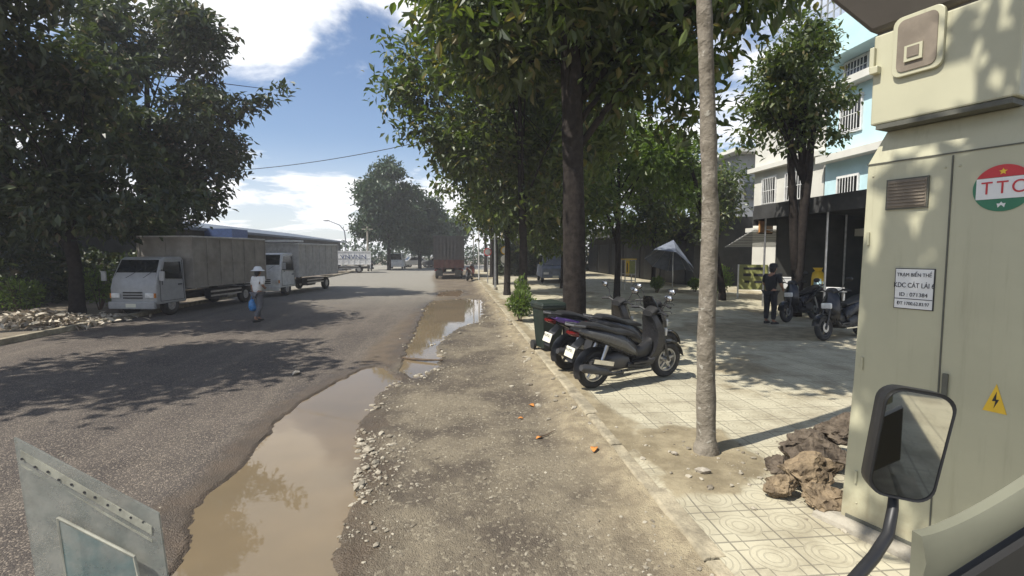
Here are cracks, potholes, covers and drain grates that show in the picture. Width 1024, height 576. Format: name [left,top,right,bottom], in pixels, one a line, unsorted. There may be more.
pothole [168,364,402,576]
pothole [397,298,485,379]
